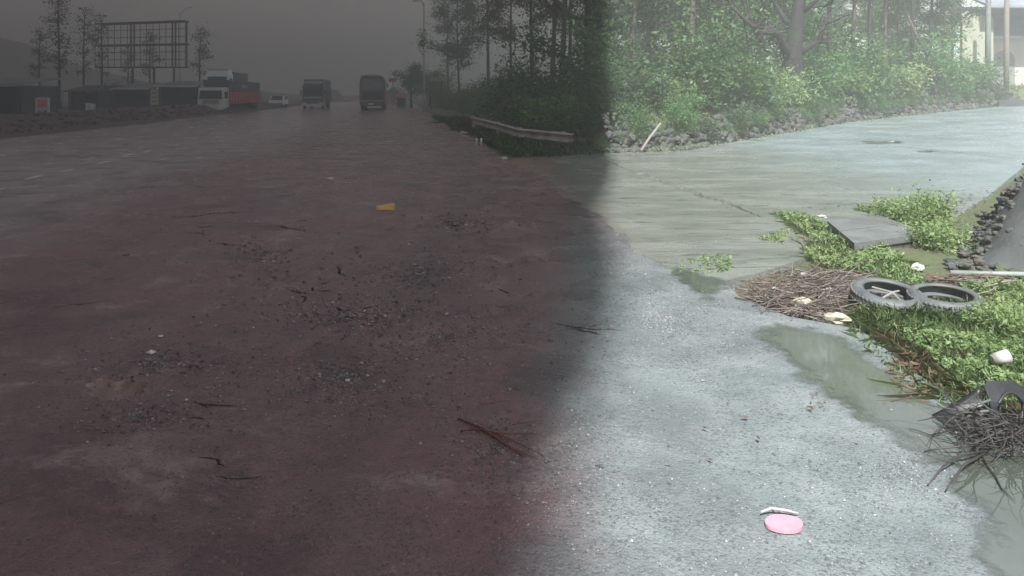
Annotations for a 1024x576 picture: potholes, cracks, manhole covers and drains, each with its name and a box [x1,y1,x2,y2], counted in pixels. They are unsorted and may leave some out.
crack [170,211,309,246]
crack [550,322,620,335]
crack [288,266,370,311]
crack [187,401,237,419]
crack [199,457,261,480]
